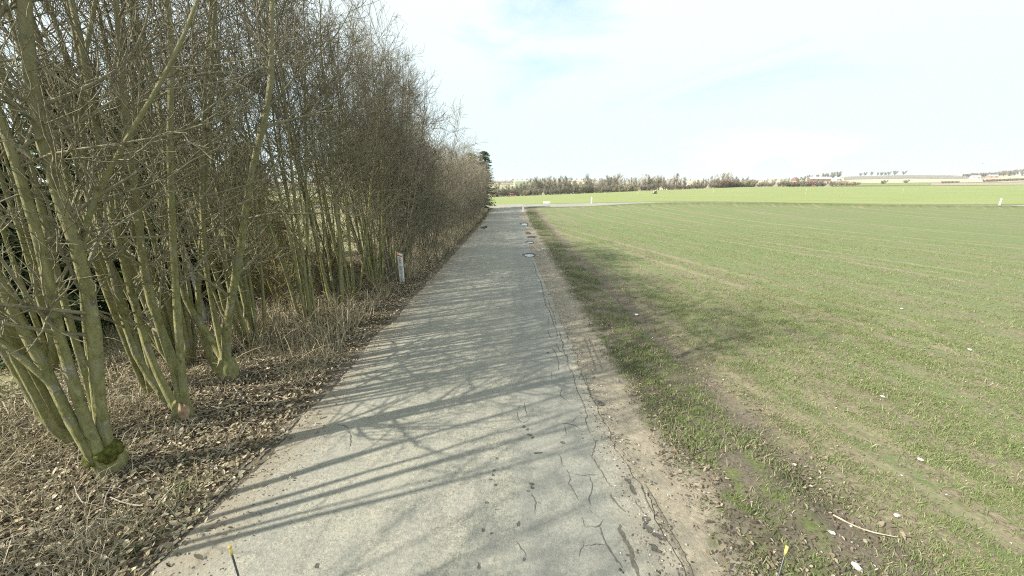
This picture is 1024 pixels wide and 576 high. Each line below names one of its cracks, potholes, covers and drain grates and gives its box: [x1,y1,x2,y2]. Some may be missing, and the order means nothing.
crack [532,262,657,568]
